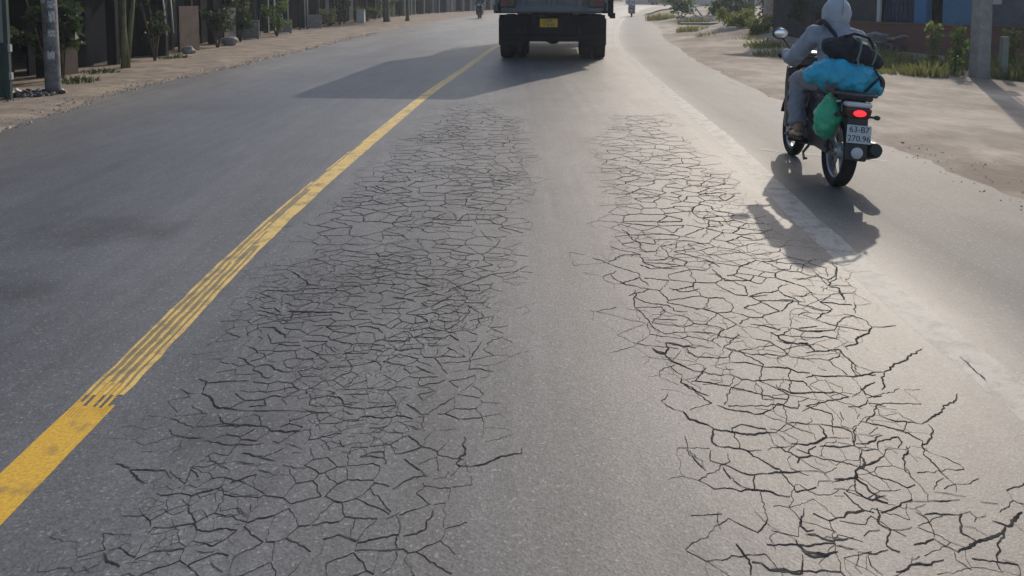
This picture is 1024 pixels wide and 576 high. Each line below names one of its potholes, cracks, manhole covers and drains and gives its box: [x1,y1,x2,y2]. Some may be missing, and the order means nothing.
crack [37,101,545,576]
crack [569,114,1024,576]
